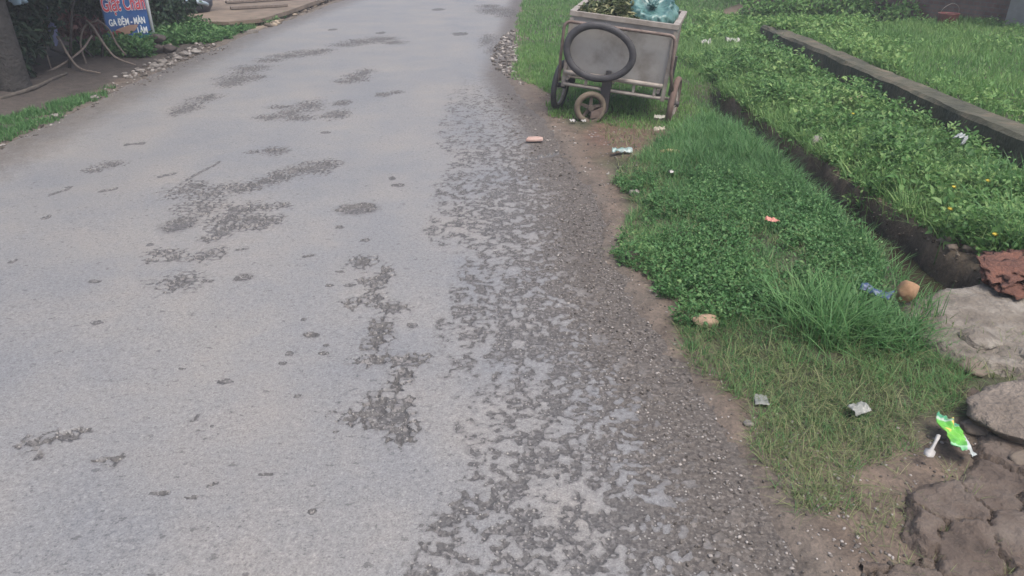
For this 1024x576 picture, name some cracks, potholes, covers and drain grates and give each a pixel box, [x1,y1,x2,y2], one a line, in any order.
pothole [195,225,242,244]
pothole [345,254,380,274]
pothole [242,158,344,191]
pothole [325,316,435,450]
pothole [141,247,191,264]
pothole [210,73,267,88]
pothole [316,108,356,121]
pothole [185,93,225,104]
pothole [338,264,415,315]
crack [157,161,220,181]
pothole [335,203,377,215]
pothole [188,246,228,263]
